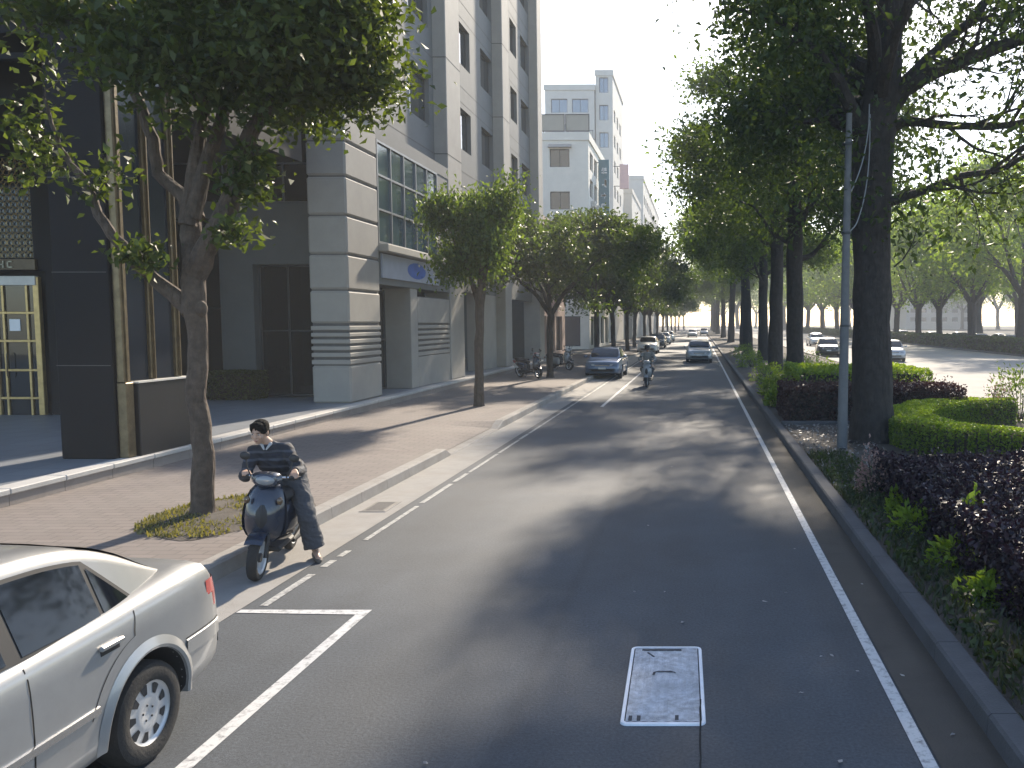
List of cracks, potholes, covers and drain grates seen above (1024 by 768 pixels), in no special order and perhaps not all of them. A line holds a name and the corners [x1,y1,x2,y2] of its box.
manhole cover [620,646,706,726]
